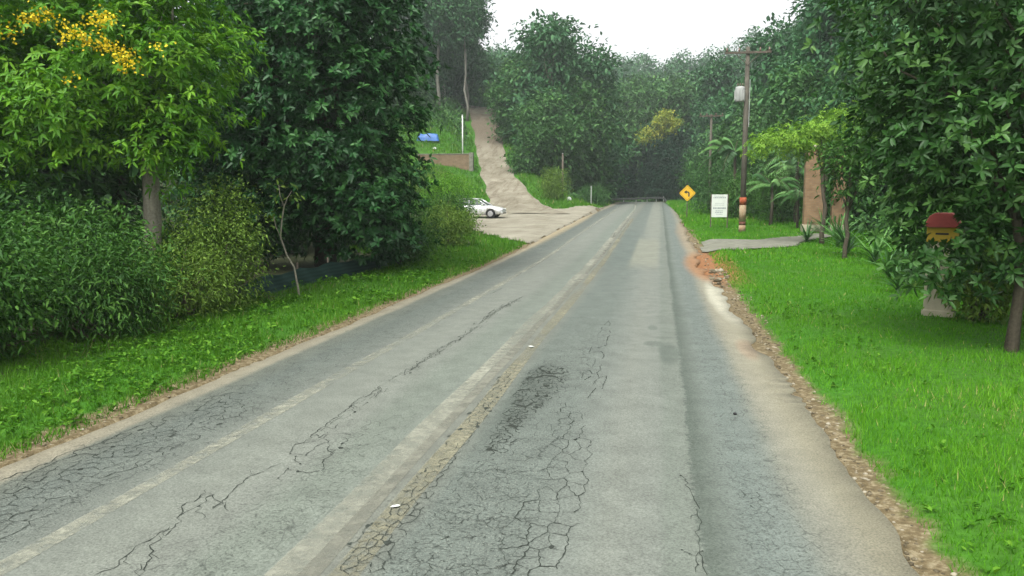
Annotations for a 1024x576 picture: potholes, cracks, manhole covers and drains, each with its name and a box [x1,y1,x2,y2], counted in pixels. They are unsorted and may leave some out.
crack [95,481,244,576]
crack [679,474,707,574]
crack [0,387,252,539]
crack [245,288,523,479]
crack [340,360,592,576]
crack [581,320,611,397]
